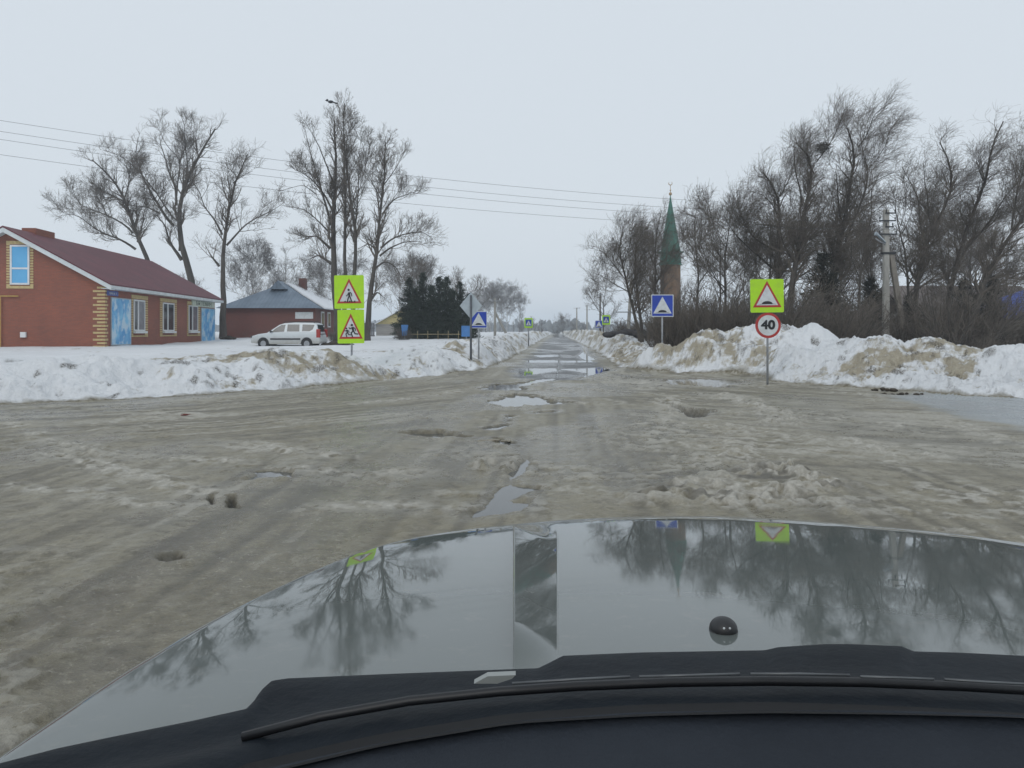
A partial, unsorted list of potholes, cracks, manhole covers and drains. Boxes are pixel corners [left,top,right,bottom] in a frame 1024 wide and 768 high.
pothole [480,422,515,431]
pothole [388,428,475,439]
pothole [472,378,562,391]
pothole [156,545,200,562]
pothole [486,436,523,447]
pothole [223,493,244,509]
pothole [204,492,222,505]
pothole [669,404,725,419]
pothole [476,392,577,408]
